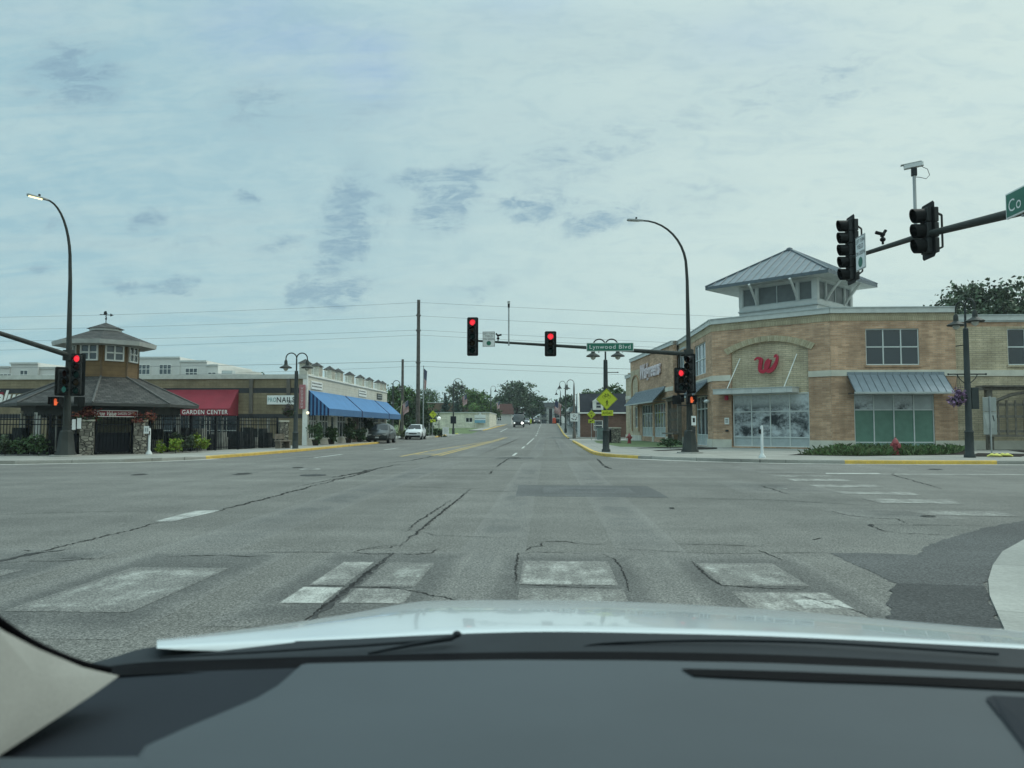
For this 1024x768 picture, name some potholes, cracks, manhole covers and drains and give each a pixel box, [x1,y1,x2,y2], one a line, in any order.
crack [353,458,529,555]
